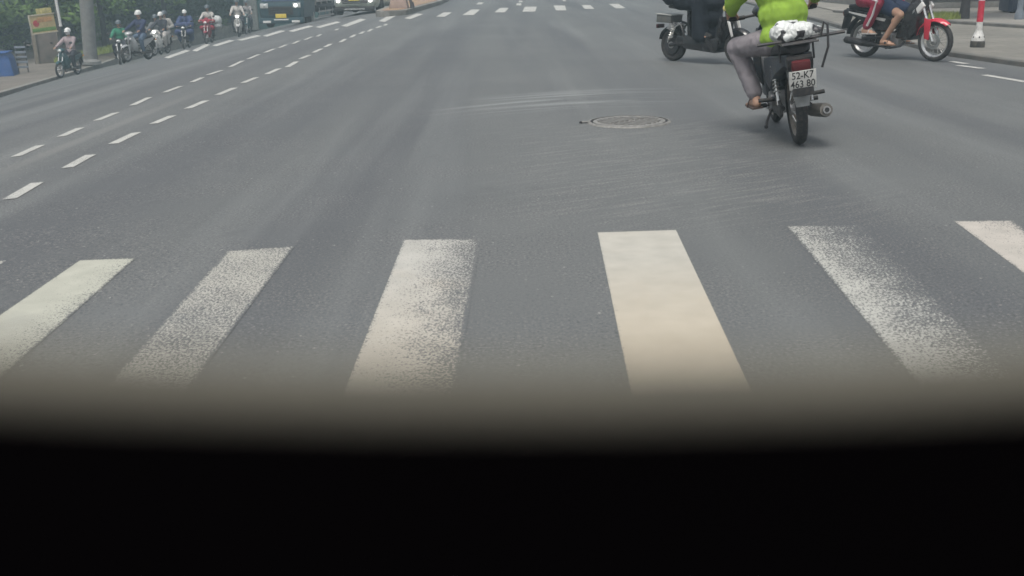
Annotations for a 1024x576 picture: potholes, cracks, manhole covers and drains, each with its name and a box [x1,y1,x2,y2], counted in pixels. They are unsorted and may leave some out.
manhole cover [579,115,671,128]
